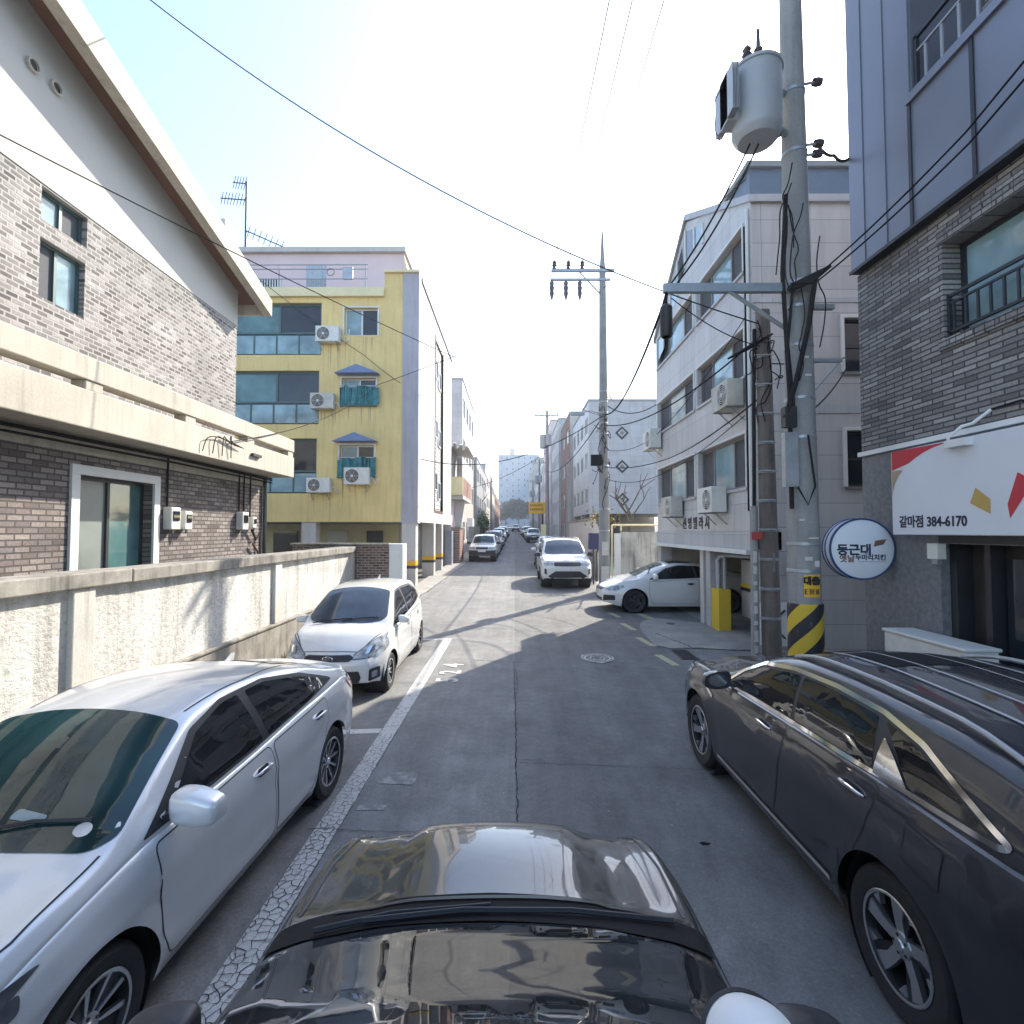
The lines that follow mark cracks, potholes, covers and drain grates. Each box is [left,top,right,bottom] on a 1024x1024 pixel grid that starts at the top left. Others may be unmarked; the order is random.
crack [513,661,700,822]
manhole cover [581,654,614,663]
